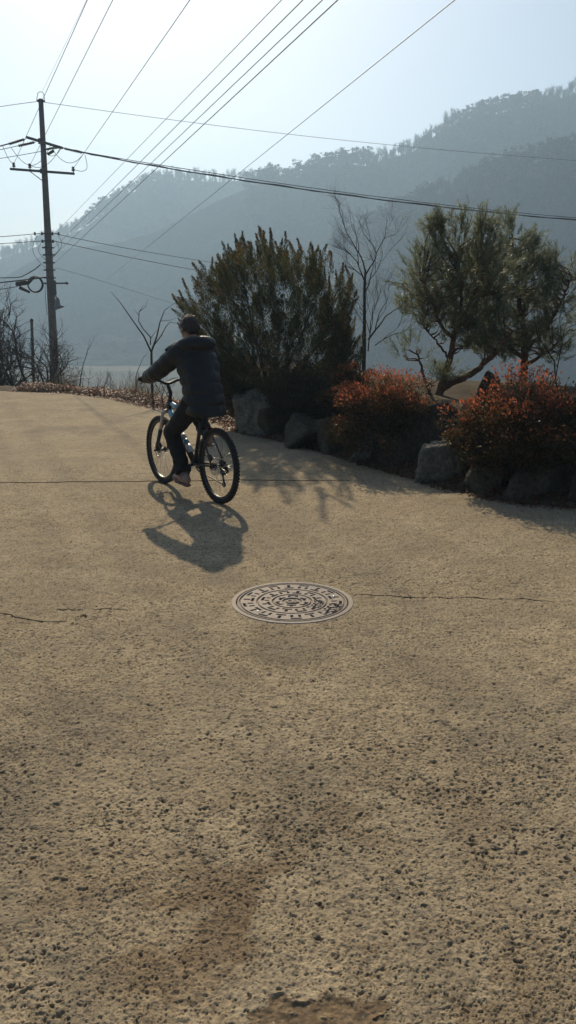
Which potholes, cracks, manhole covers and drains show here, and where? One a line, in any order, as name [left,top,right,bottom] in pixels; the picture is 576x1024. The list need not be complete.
crack [357,594,552,602]
manhole cover [231,582,353,624]
crack [0,608,128,622]
